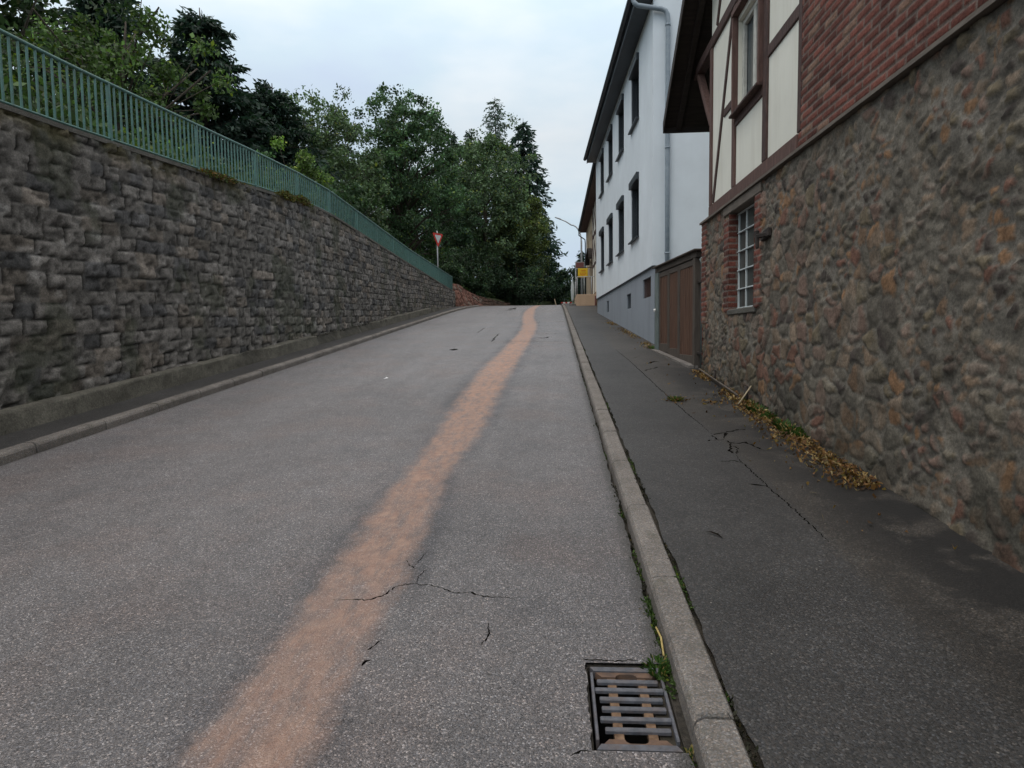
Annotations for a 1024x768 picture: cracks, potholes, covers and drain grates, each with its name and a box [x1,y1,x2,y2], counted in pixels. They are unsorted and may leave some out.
crack [708,429,761,454]
drain grate [583,663,697,765]
crack [354,553,511,601]
